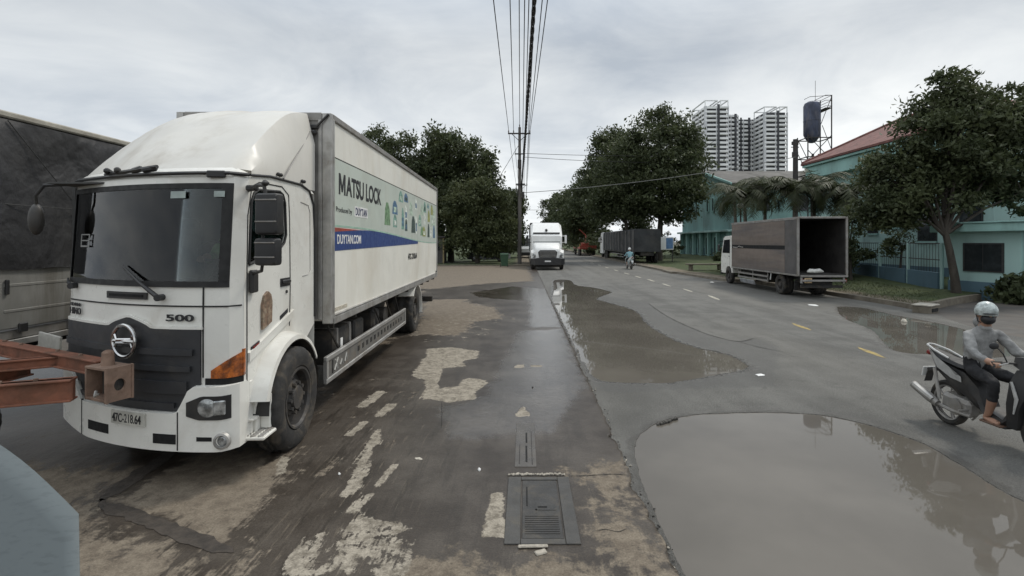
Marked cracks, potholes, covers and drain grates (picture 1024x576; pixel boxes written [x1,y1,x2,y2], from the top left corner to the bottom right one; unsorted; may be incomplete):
pothole [552,280,749,383]
pothole [837,306,1011,358]
manhole cover [504,477,581,545]
pothole [634,412,1024,576]
